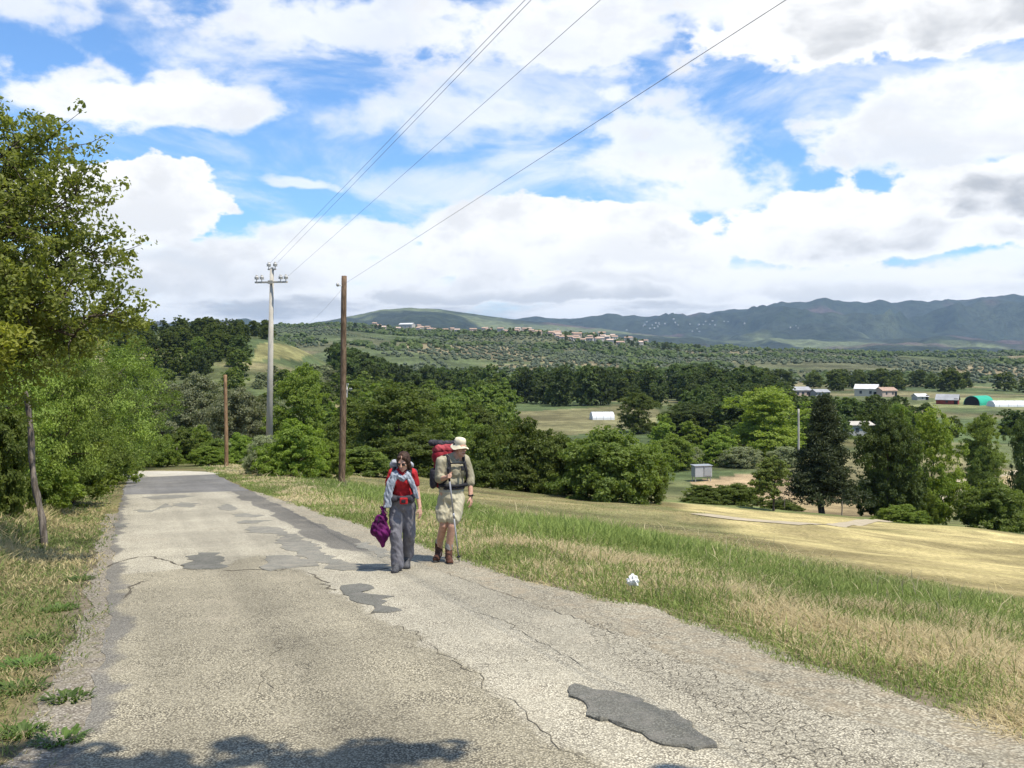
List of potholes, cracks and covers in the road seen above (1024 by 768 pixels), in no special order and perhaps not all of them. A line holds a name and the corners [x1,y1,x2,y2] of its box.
crack [447,572,984,768]
crack [308,572,589,763]
crack [108,556,199,599]
